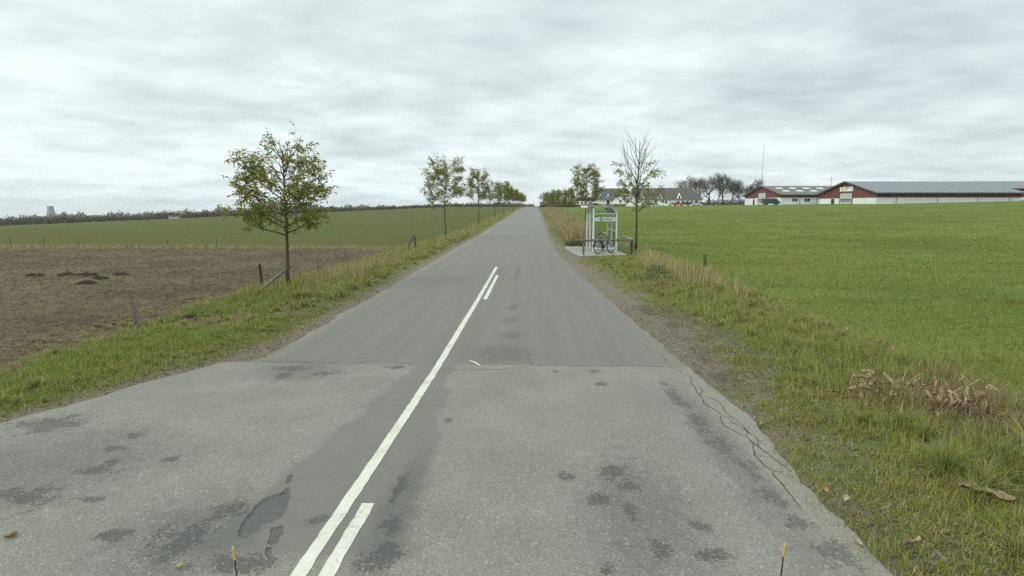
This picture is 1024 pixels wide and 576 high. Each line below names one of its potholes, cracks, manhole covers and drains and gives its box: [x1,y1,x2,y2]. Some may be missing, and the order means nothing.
crack [670,367,802,509]
